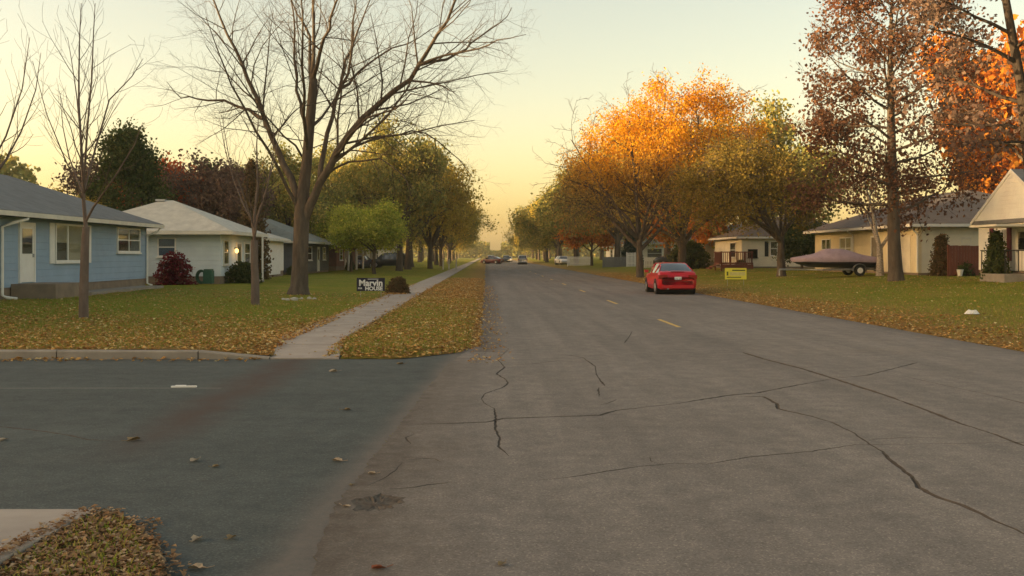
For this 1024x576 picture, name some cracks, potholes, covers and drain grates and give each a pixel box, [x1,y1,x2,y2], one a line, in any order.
crack [409,343,1024,534]
crack [367,434,448,489]
pothole [351,493,406,511]
